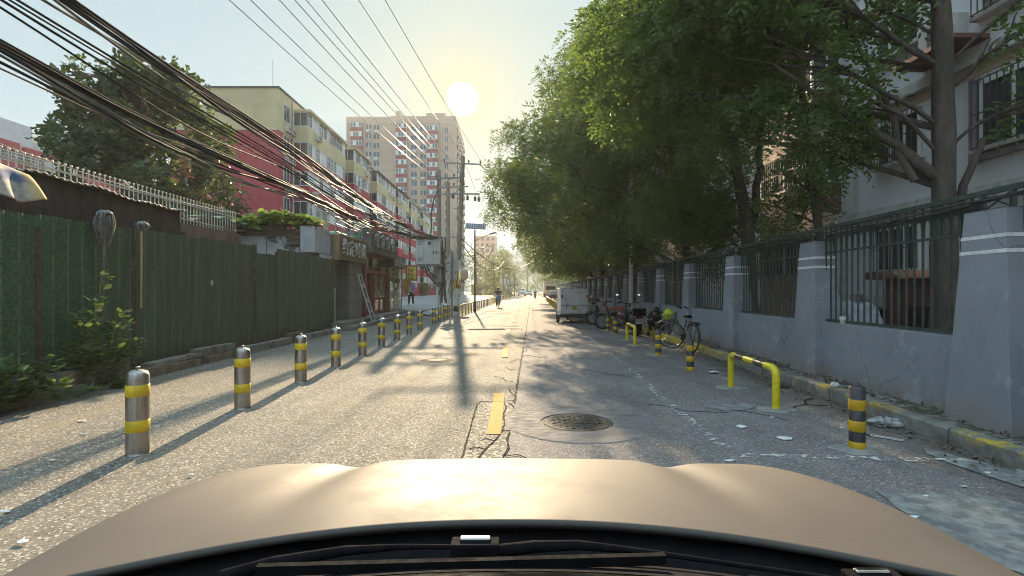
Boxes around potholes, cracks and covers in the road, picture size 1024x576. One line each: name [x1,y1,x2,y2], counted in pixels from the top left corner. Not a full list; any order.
crack [460,388,526,459]
manhole cover [505,406,658,444]
